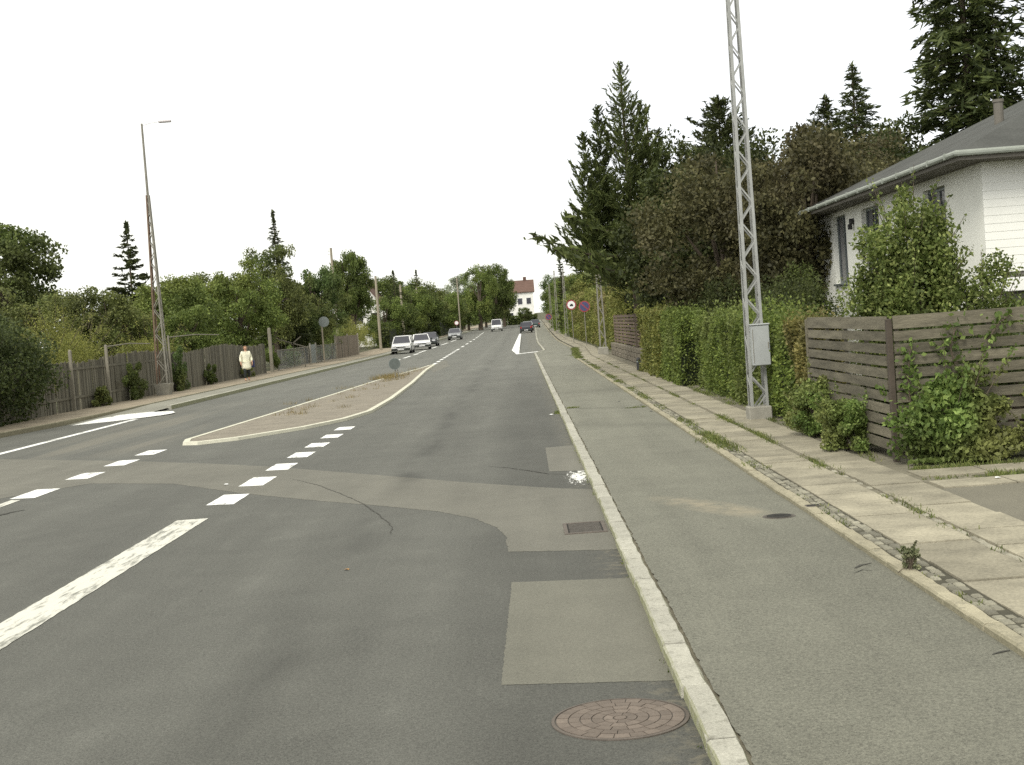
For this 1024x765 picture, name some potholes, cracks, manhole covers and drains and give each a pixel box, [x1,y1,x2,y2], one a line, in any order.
manhole cover [551,698,690,741]
crack [290,478,393,533]
